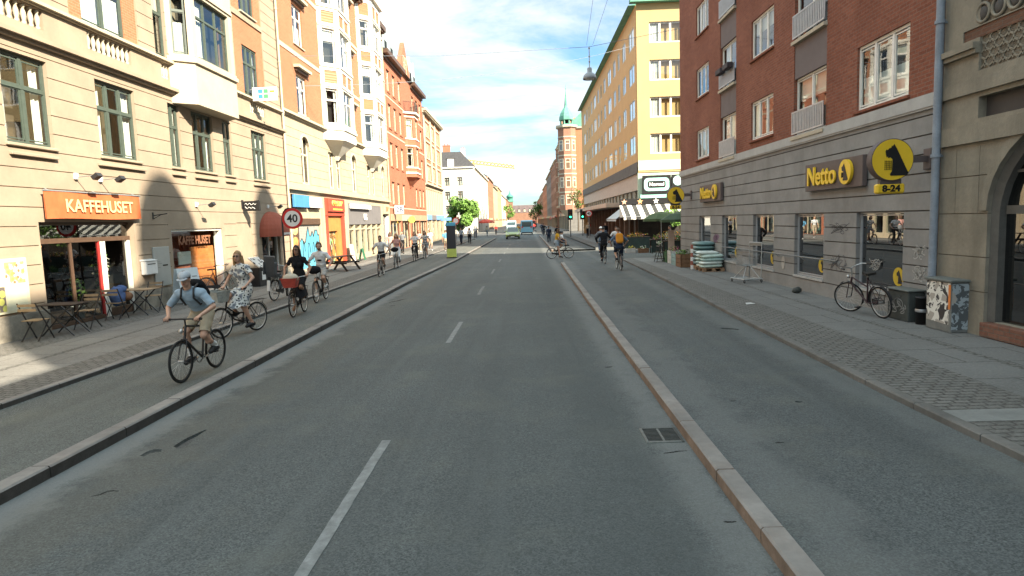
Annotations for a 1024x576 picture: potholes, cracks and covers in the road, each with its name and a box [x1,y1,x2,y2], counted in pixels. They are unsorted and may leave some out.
drain grate [639,427,685,443]
